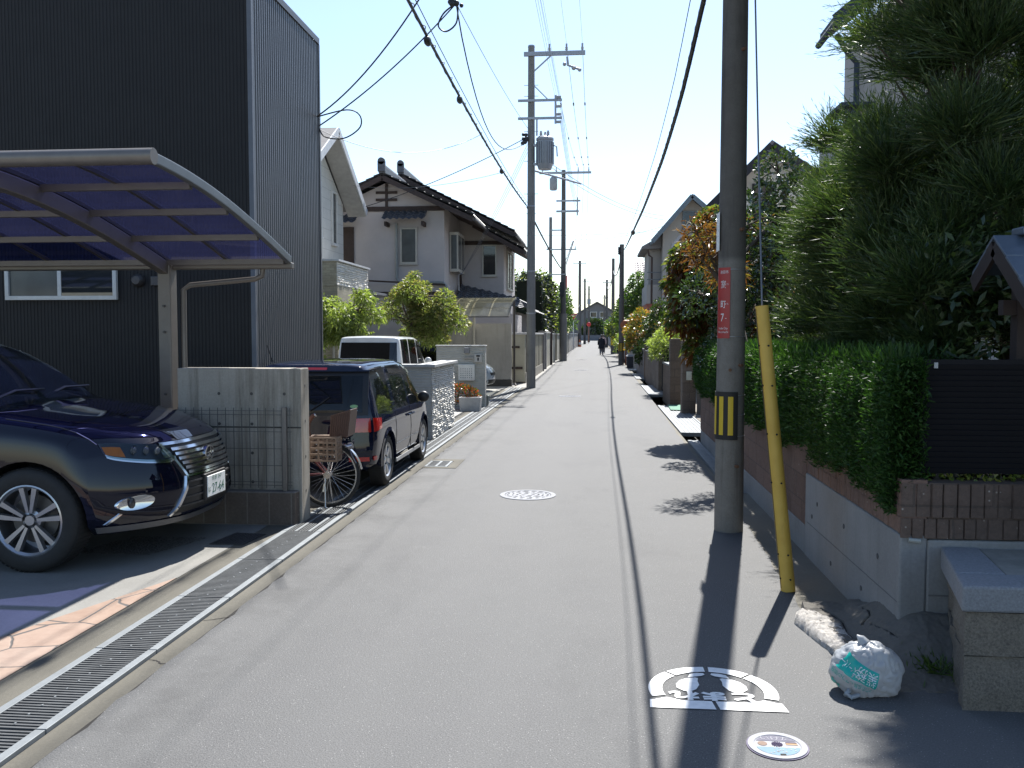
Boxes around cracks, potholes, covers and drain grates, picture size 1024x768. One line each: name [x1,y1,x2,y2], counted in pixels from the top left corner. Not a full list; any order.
drain grate [282,508,353,534]
drain grate [178,559,282,601]
drain grate [392,464,415,477]
manhole cover [746,732,809,761]
drain grate [0,730,45,768]
drain grate [422,459,465,469]
drain grate [319,490,378,511]
drain grate [348,476,399,493]
manhole cover [500,490,556,500]
crack [831,611,898,638]
drain grate [238,531,321,562]
